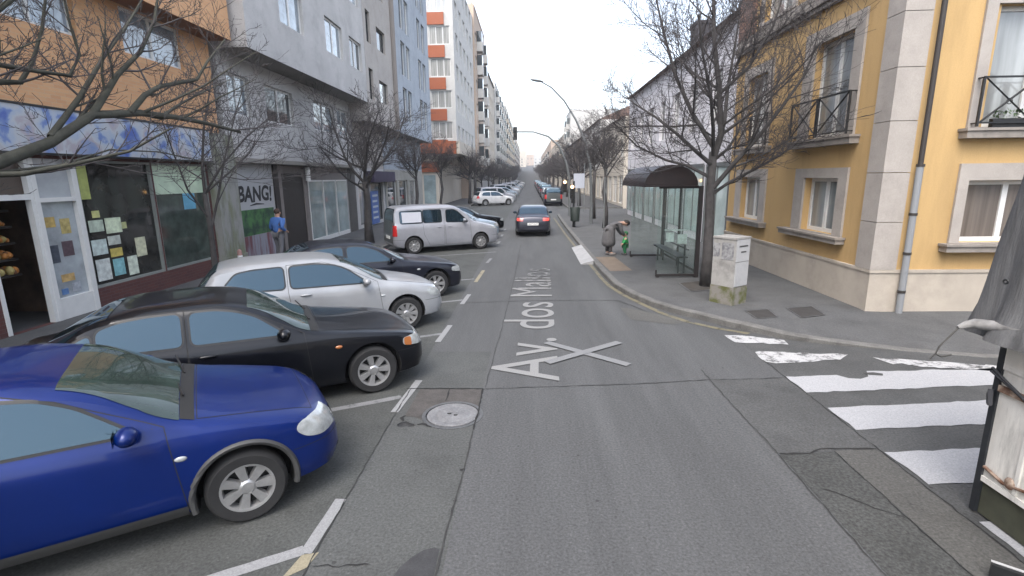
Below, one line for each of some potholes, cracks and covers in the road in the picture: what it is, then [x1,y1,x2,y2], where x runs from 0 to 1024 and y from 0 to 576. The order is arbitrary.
manhole cover [422,401,483,430]
utility cover [746,309,778,319]
utility cover [787,306,826,318]
